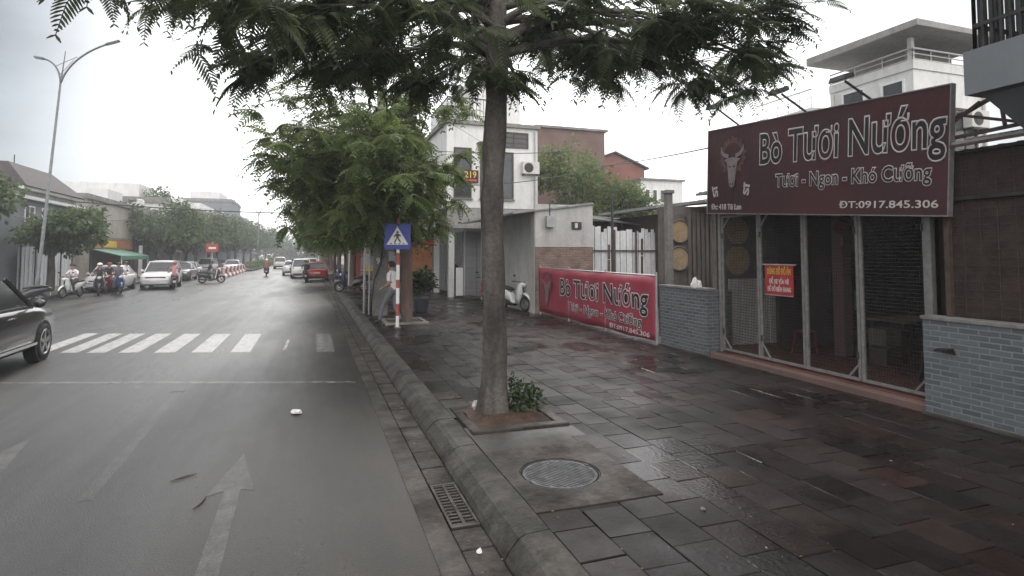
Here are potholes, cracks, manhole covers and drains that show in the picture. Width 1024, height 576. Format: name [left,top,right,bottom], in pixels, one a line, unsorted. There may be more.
manhole cover [520,459,601,488]
drain grate [429,482,481,533]
